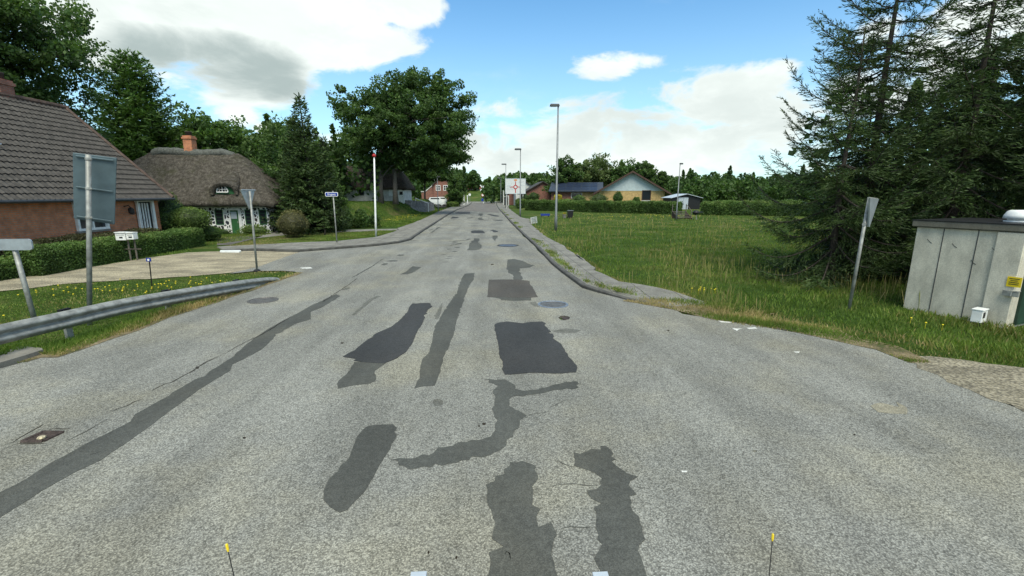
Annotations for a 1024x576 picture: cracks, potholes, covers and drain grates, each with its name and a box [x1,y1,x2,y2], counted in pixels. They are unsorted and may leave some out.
crack [7,318,288,455]
